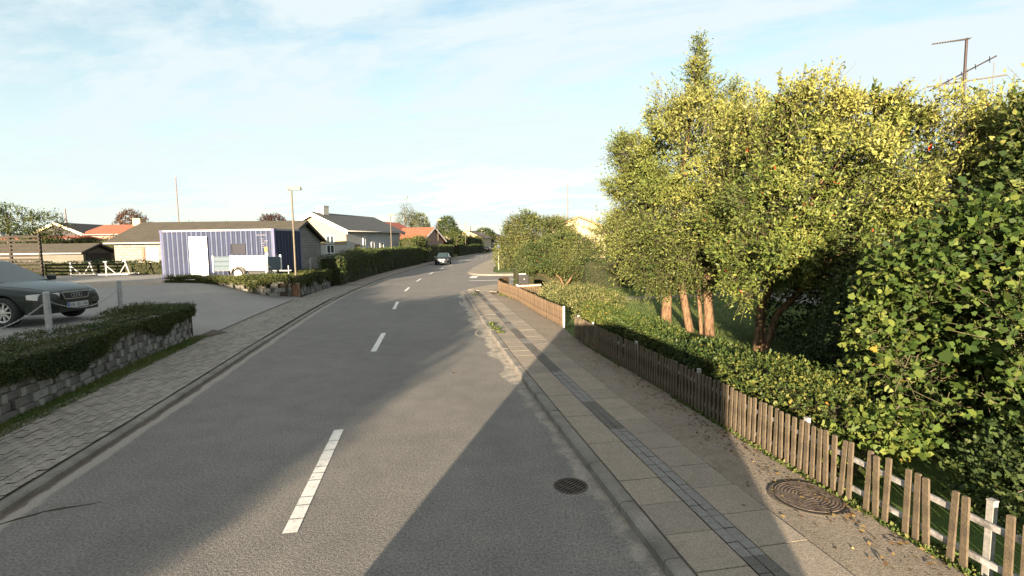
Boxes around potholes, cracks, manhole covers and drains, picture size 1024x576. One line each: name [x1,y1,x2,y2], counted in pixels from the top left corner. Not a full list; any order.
drain grate [553,478,588,494]
manhole cover [766,479,853,517]
